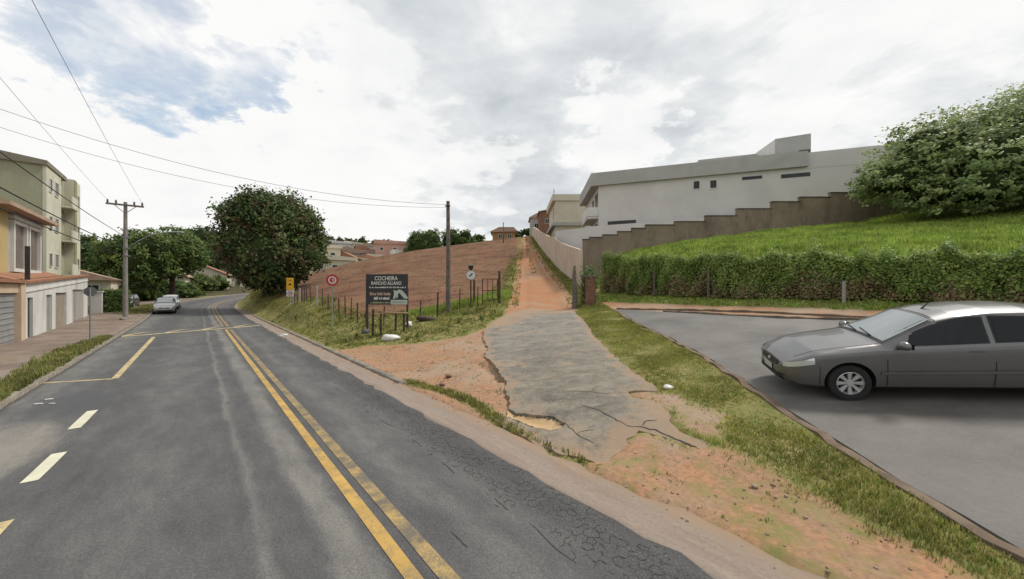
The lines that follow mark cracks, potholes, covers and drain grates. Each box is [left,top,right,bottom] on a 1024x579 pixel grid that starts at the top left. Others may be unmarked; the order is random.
crack [309,363,688,579]
pothole [507,410,564,430]
